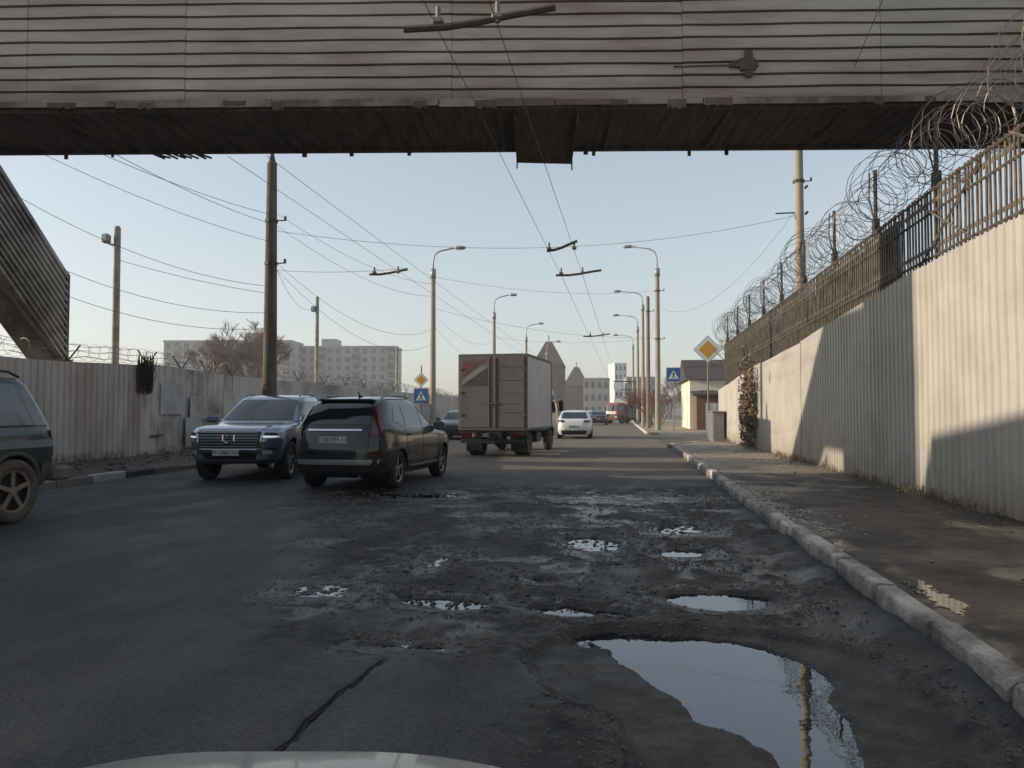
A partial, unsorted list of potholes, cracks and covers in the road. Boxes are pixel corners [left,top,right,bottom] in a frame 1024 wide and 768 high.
pothole [506,600,660,619]
pothole [630,519,738,540]
pothole [376,587,512,616]
pothole [635,542,733,563]
pothole [508,620,1024,768]
pothole [636,584,813,618]
pothole [546,532,635,563]
crack [273,660,384,751]
